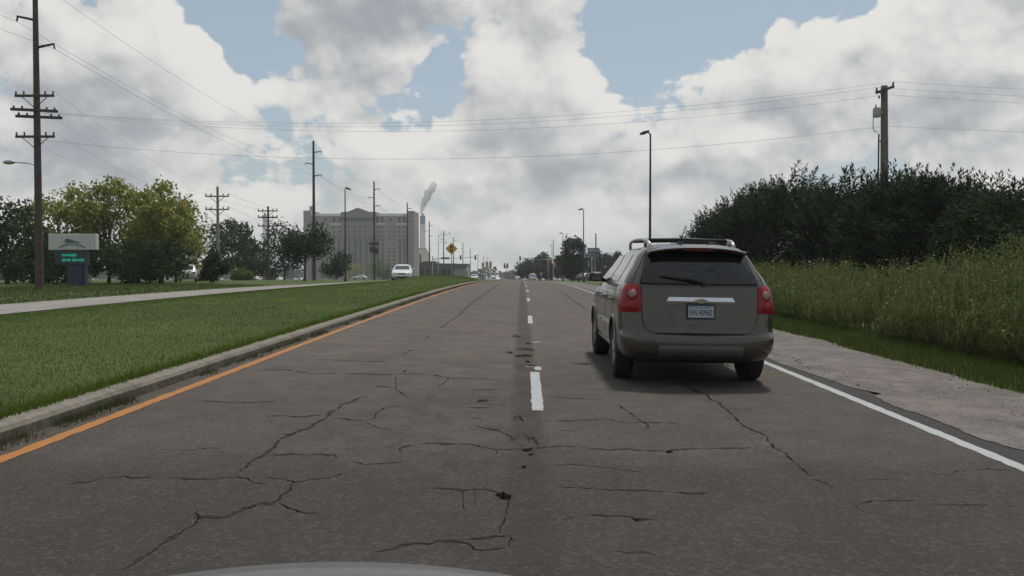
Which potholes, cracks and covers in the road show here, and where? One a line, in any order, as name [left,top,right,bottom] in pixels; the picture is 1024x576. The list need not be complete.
crack [69,284,835,571]
crack [855,500,915,512]
